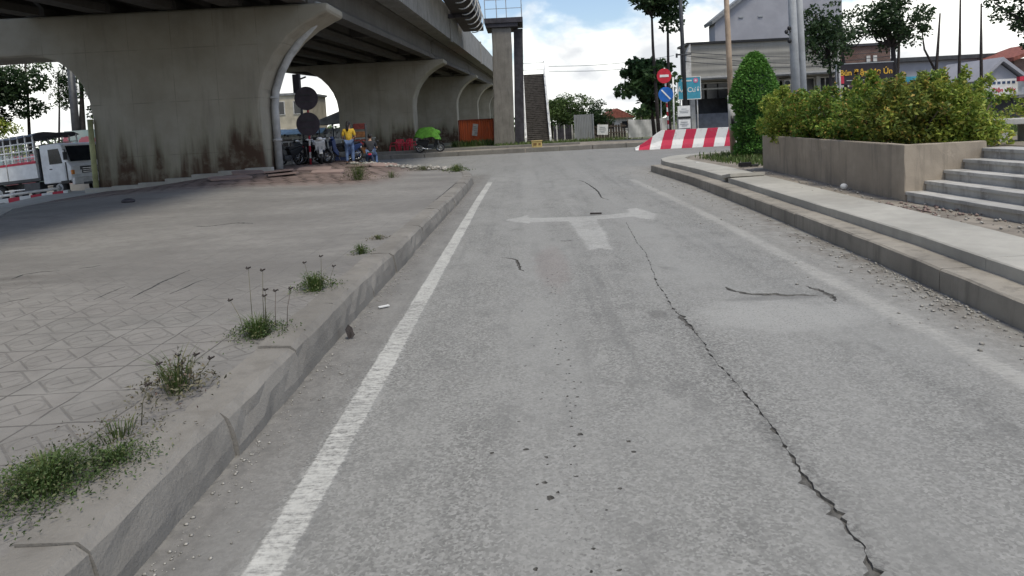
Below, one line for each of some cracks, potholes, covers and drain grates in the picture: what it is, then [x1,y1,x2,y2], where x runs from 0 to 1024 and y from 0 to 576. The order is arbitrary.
crack [628,226,884,576]
crack [94,271,205,300]
